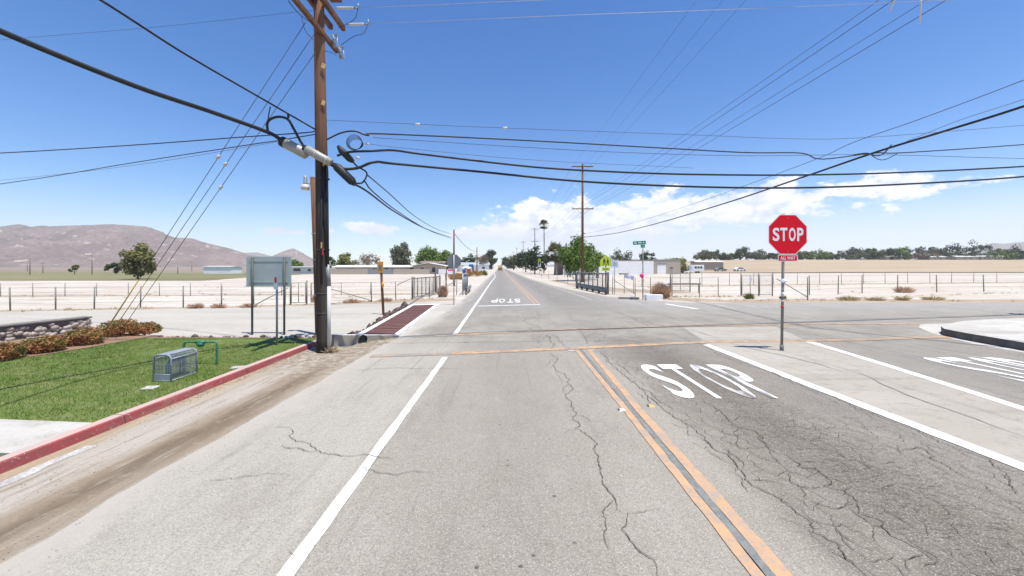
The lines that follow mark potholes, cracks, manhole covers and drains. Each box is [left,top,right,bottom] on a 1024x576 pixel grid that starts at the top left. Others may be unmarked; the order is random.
crack [542,354,658,576]
crack [277,426,431,474]
crack [600,337,1024,576]
